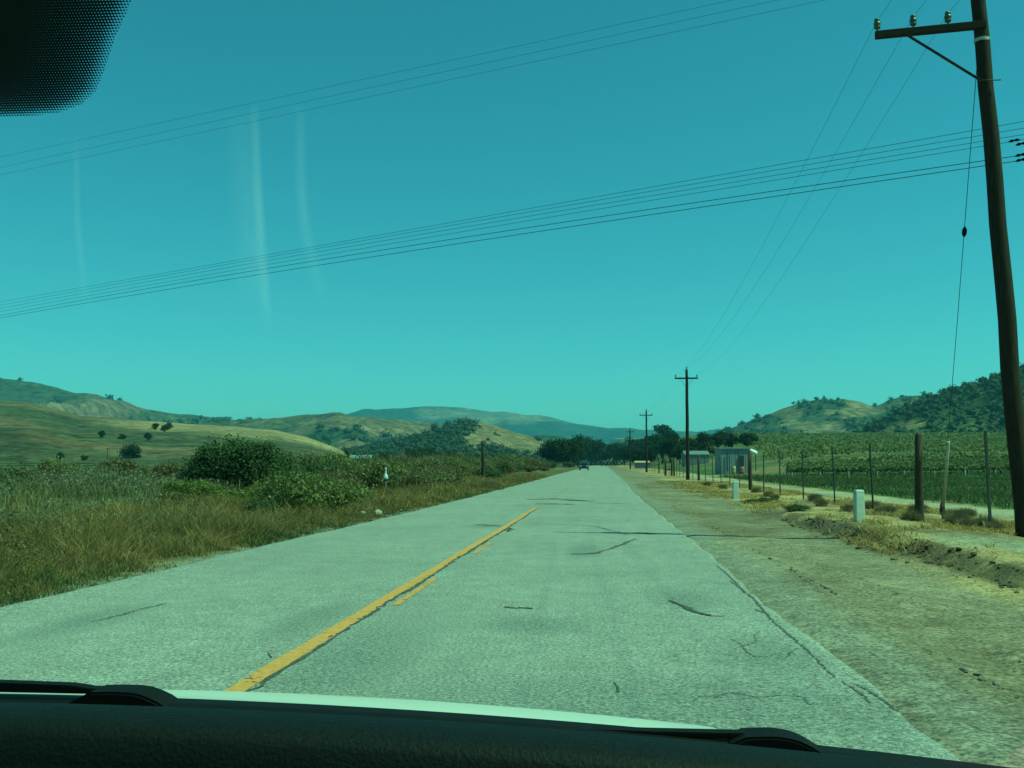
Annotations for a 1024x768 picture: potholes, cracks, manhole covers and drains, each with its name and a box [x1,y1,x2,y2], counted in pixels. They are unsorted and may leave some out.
crack [668,566,903,713]
